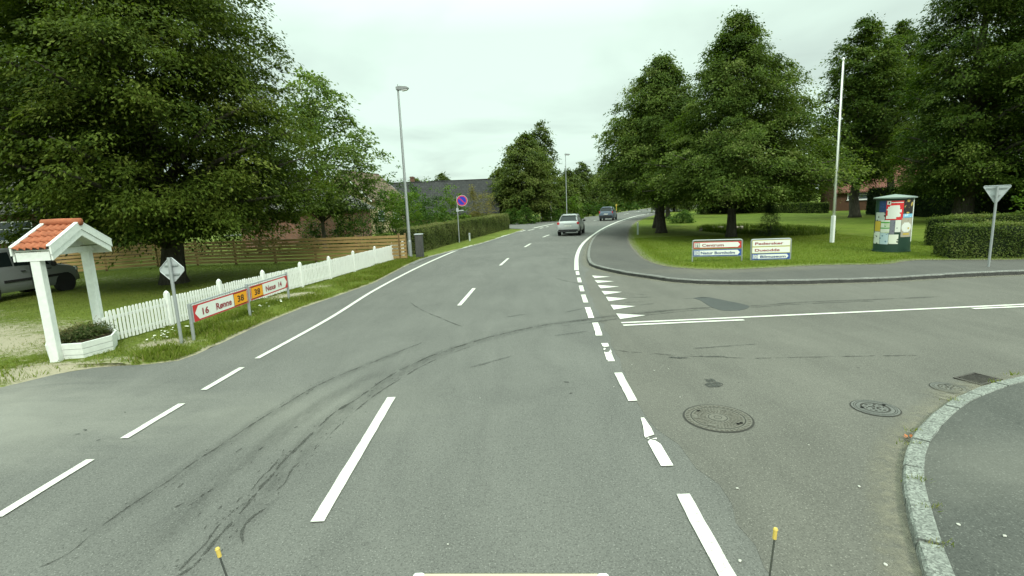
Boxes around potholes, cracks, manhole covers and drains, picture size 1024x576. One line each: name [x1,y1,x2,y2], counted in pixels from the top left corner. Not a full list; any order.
manhole cover [929,382,971,394]
manhole cover [683,405,755,433]
drain grate [953,372,1003,385]
manhole cover [850,400,902,417]
